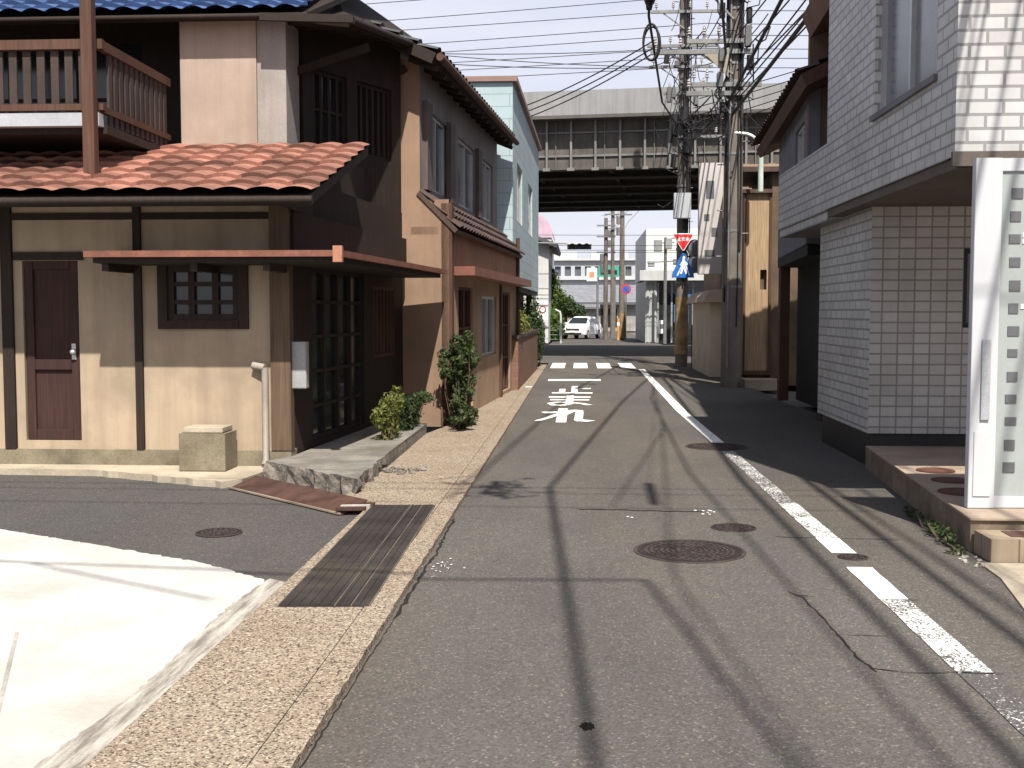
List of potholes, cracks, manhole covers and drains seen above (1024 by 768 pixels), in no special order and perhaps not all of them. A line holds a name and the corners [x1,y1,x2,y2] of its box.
crack [788,591,994,673]
manhole cover [837,553,869,561]
manhole cover [685,443,748,451]
manhole cover [711,523,757,532]
manhole cover [634,539,746,564]
manhole cover [195,527,243,537]
